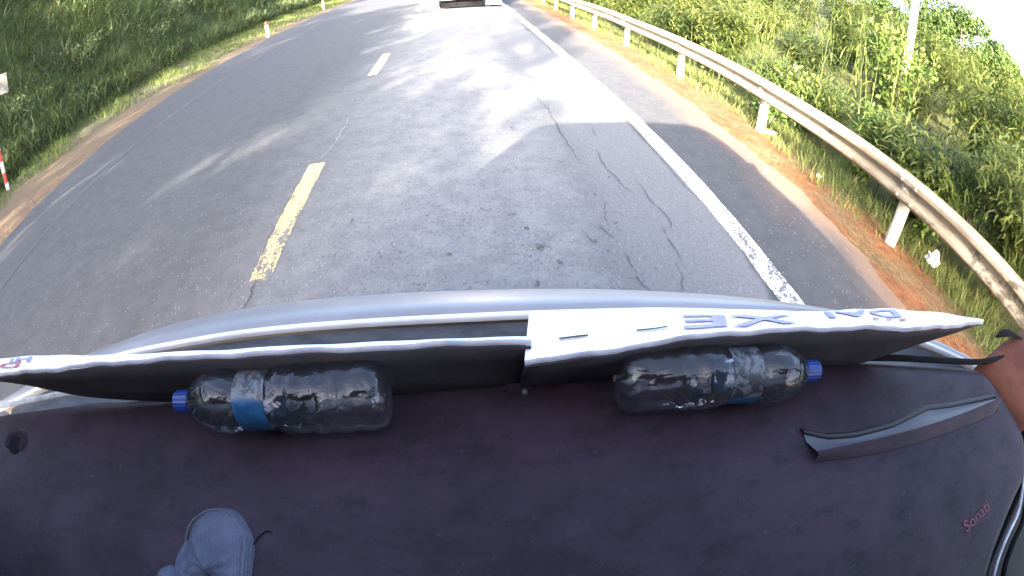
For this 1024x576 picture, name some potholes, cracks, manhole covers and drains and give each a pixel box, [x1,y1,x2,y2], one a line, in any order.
crack [519,73,684,288]
